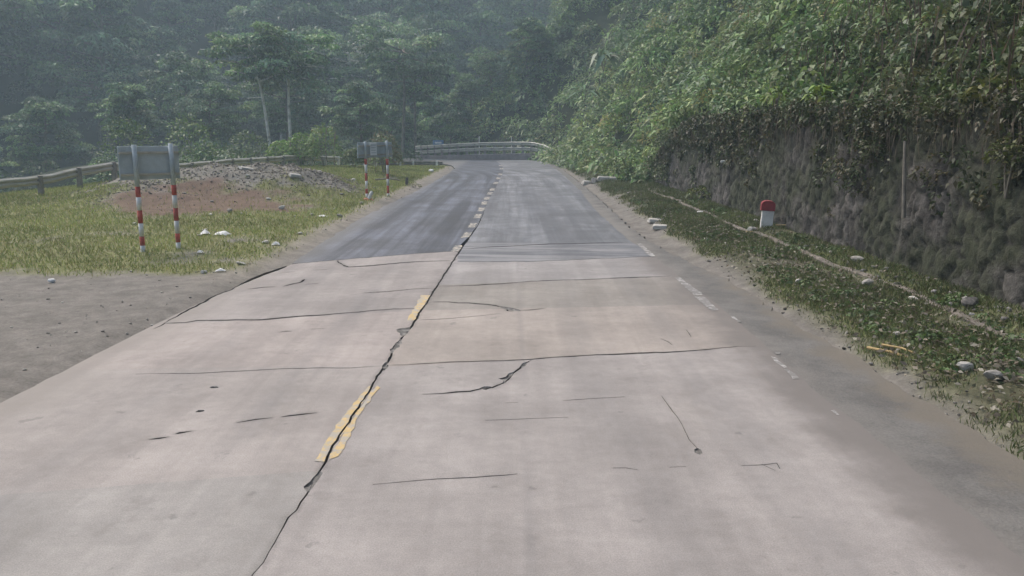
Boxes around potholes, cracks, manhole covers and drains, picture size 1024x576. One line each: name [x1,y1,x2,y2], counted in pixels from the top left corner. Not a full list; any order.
crack [153,211,737,576]
